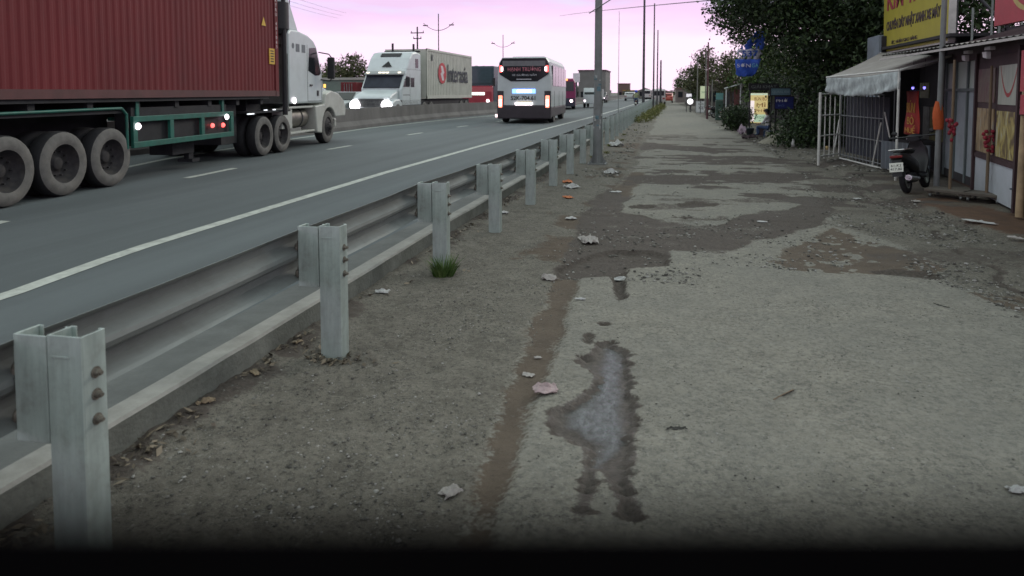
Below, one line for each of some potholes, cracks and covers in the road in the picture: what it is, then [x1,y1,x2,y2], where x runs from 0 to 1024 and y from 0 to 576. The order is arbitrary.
pothole [544,340,643,505]
pothole [554,250,672,280]
pothole [675,200,720,208]
pothole [609,269,630,300]
